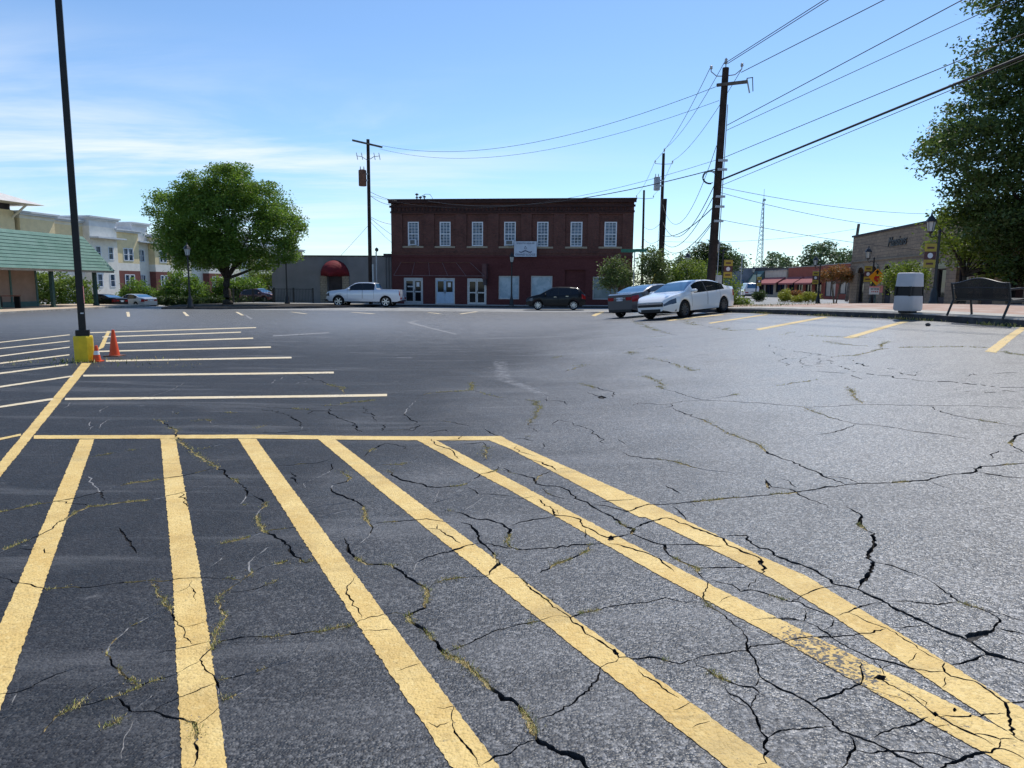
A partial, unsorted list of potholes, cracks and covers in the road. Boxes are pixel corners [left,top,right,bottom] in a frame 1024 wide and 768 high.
crack [261,320,1024,768]
pothole [965,629,994,643]
crack [3,610,208,768]
crack [1,384,403,701]
